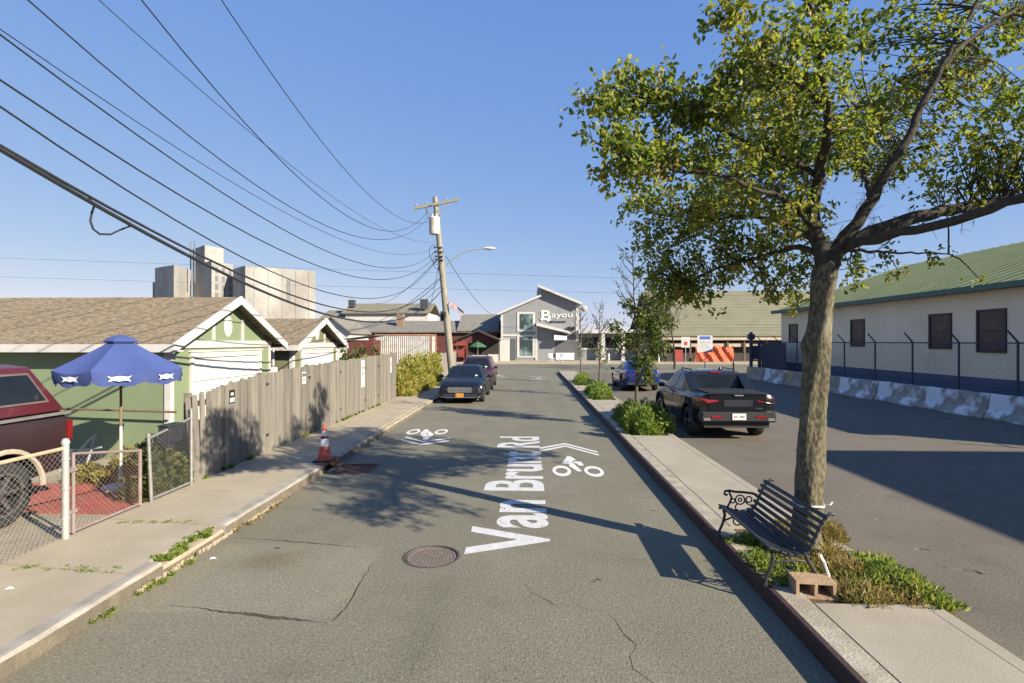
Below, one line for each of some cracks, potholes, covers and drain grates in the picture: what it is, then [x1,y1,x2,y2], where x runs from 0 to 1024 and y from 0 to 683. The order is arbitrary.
drain grate [315,456,381,474]
manhole cover [402,545,460,568]
crack [524,584,669,683]
crack [169,538,373,623]
